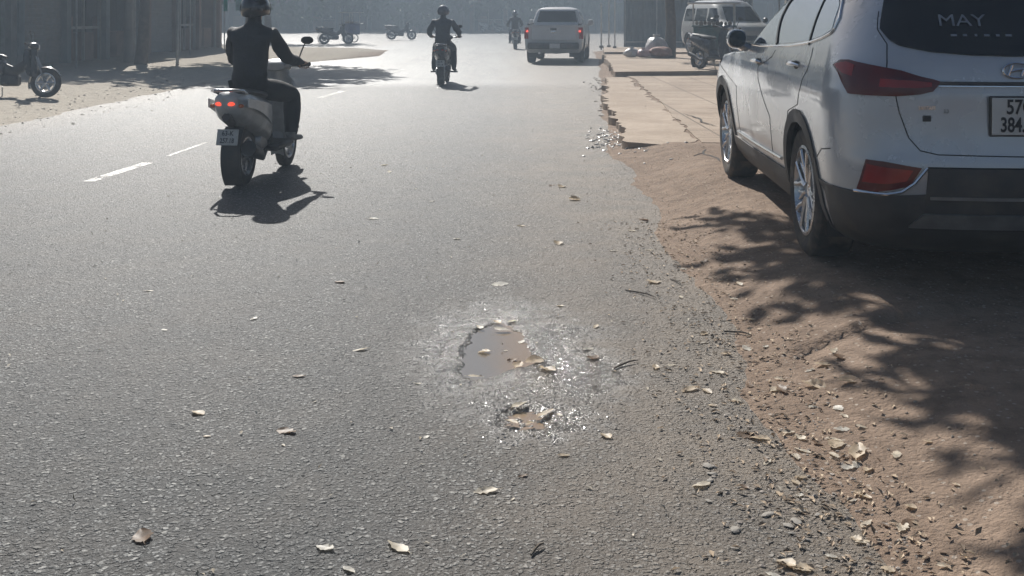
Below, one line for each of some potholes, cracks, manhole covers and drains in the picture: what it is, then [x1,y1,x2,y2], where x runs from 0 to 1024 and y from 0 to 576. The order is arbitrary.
pothole [492,401,558,434]
pothole [453,319,546,382]
